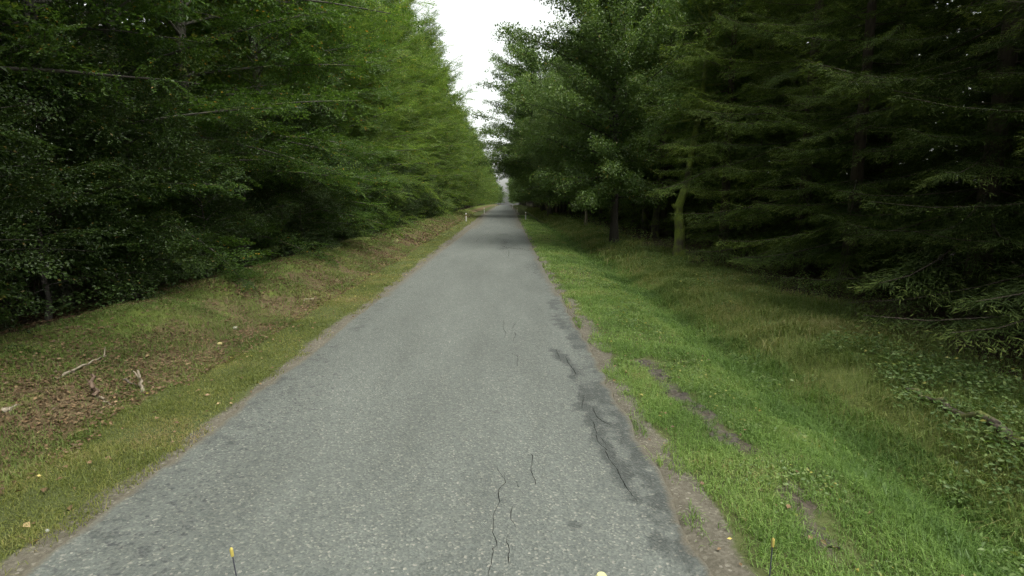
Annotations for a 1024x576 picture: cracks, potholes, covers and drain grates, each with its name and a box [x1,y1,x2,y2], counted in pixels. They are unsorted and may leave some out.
crack [581,401,638,502]
crack [488,452,537,573]
